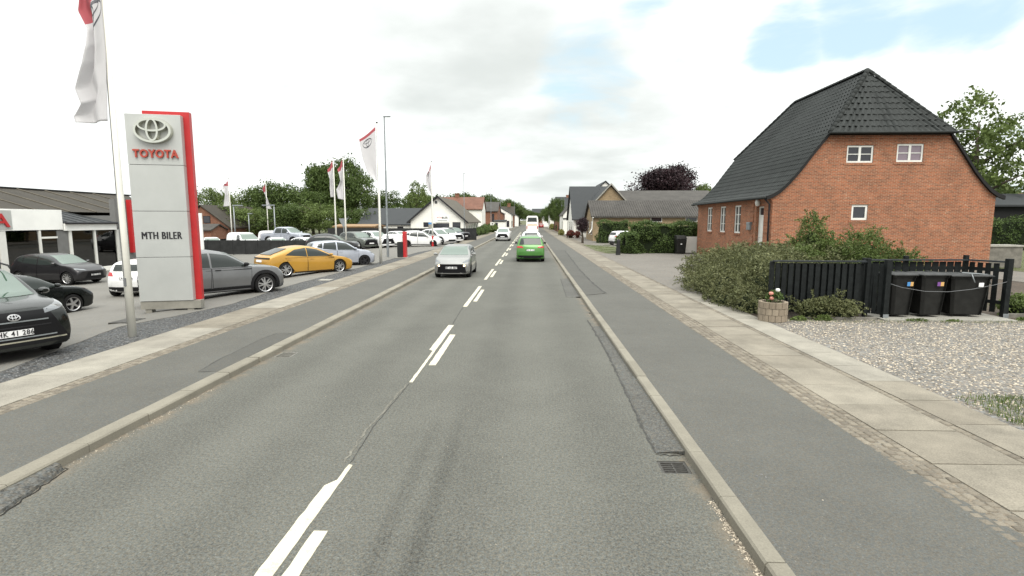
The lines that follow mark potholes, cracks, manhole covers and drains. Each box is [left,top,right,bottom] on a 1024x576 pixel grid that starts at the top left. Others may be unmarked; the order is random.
drain grate [657,461,692,474]
